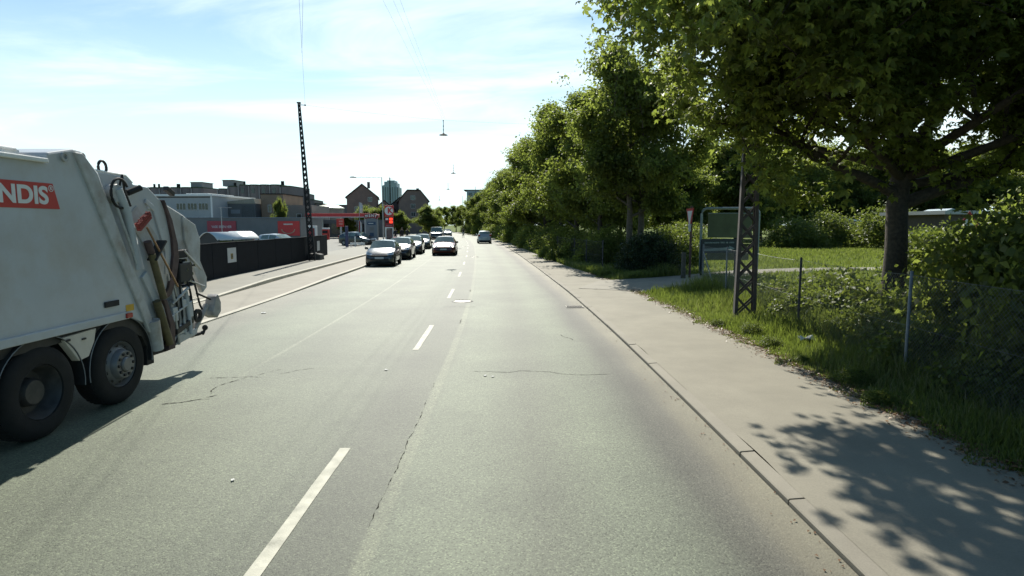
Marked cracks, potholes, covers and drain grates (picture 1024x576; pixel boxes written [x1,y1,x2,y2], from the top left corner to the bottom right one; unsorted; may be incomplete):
crack [369,290,471,525]
